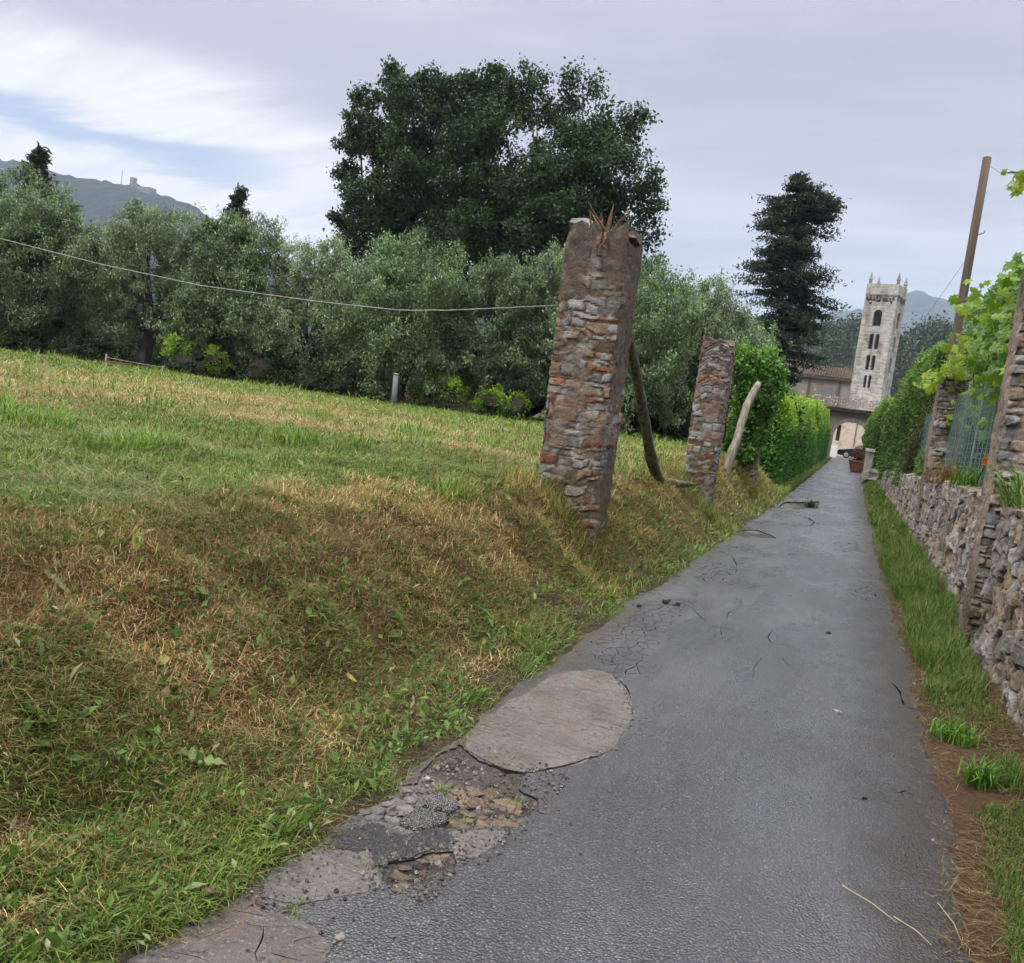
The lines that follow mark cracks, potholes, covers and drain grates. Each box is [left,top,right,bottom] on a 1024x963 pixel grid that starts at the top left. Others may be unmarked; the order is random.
crack [590,585,786,674]
pothole [382,851,456,892]
pothole [737,529,774,538]
pothole [779,501,819,509]
pothole [357,744,539,829]
